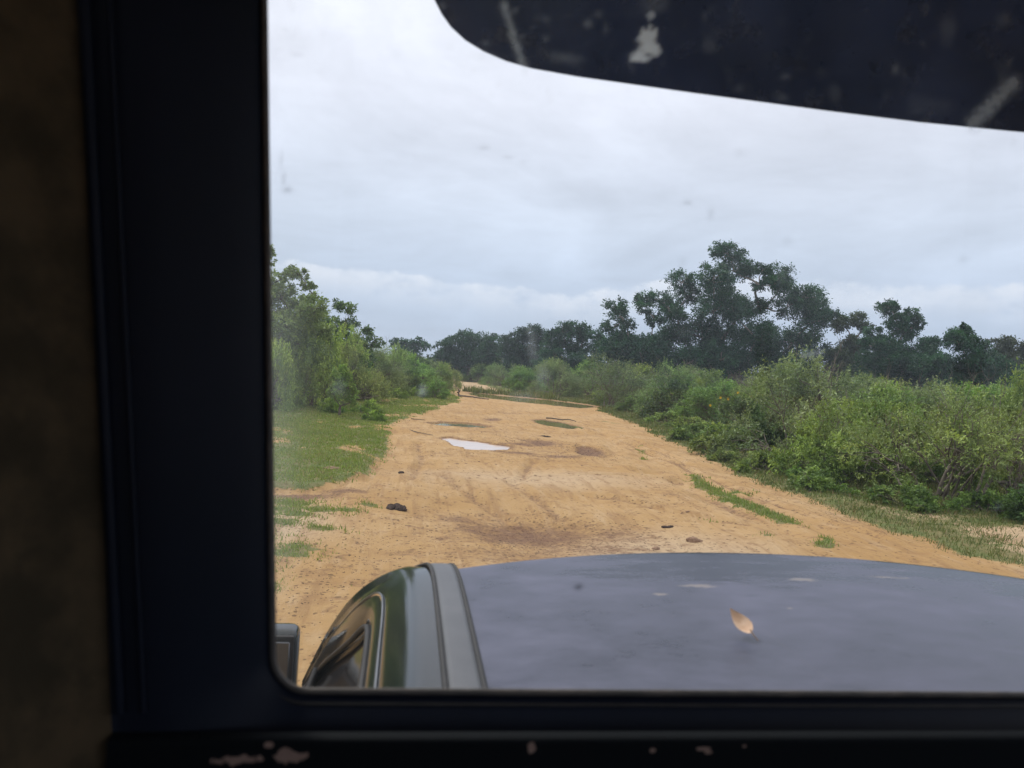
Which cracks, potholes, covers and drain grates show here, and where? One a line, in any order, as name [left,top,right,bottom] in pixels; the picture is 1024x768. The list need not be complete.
pothole [438,436,515,450]
pothole [531,419,584,429]
